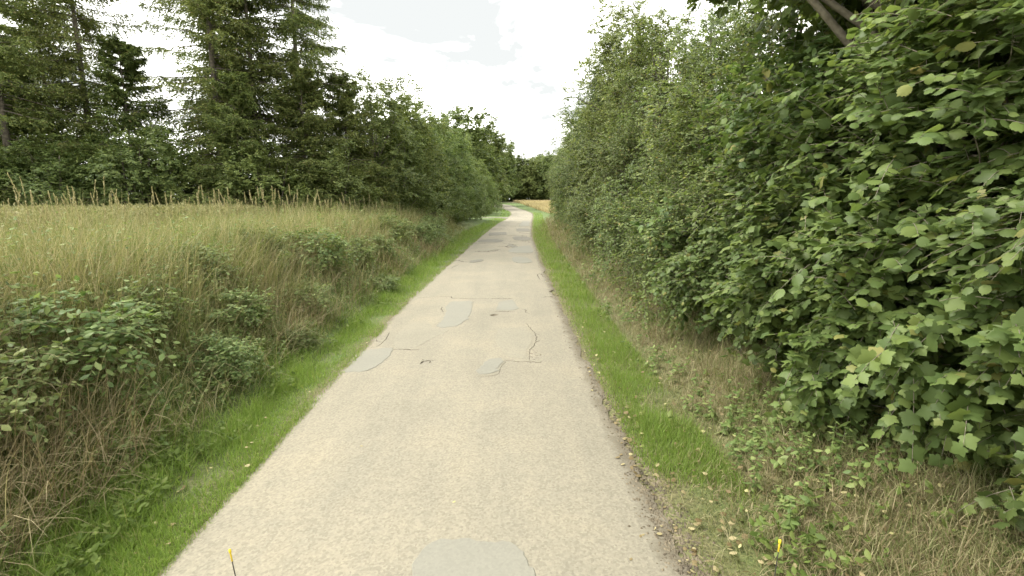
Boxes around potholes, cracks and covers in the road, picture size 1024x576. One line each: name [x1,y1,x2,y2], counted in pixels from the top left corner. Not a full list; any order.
crack [425,297,541,377]
